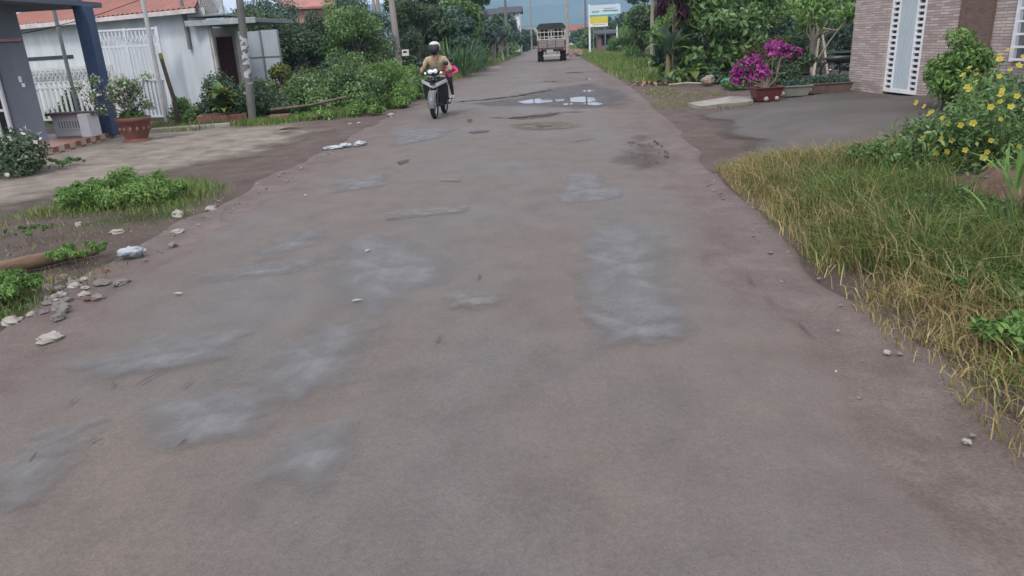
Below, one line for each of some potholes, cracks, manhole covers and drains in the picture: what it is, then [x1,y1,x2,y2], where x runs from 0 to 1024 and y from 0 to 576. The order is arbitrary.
pothole [477,84,623,107]
